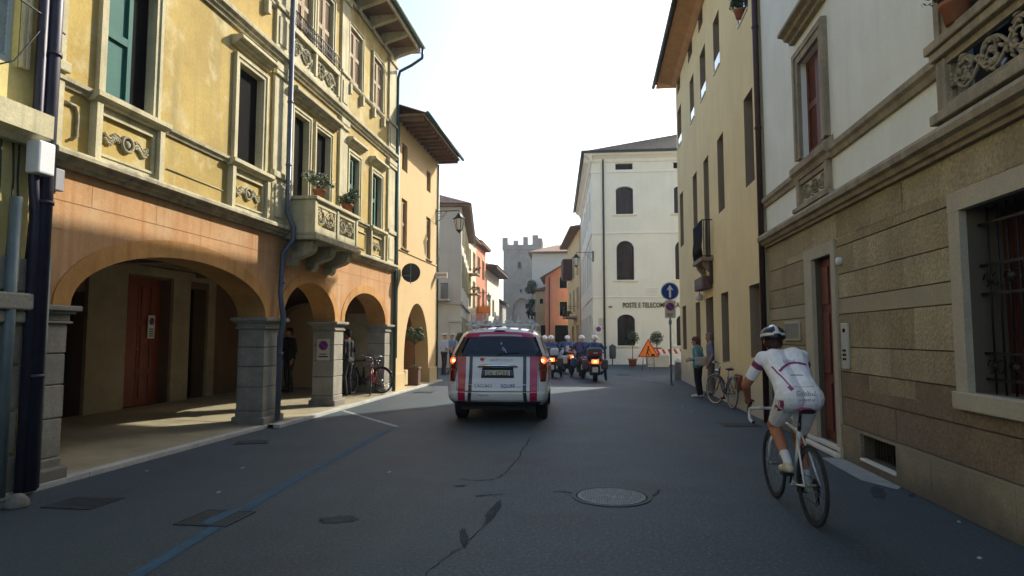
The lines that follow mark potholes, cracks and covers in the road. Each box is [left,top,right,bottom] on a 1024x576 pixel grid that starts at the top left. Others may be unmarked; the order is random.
manhole cover [572,487,652,507]
drain grate [40,495,125,510]
crack [425,436,532,576]
